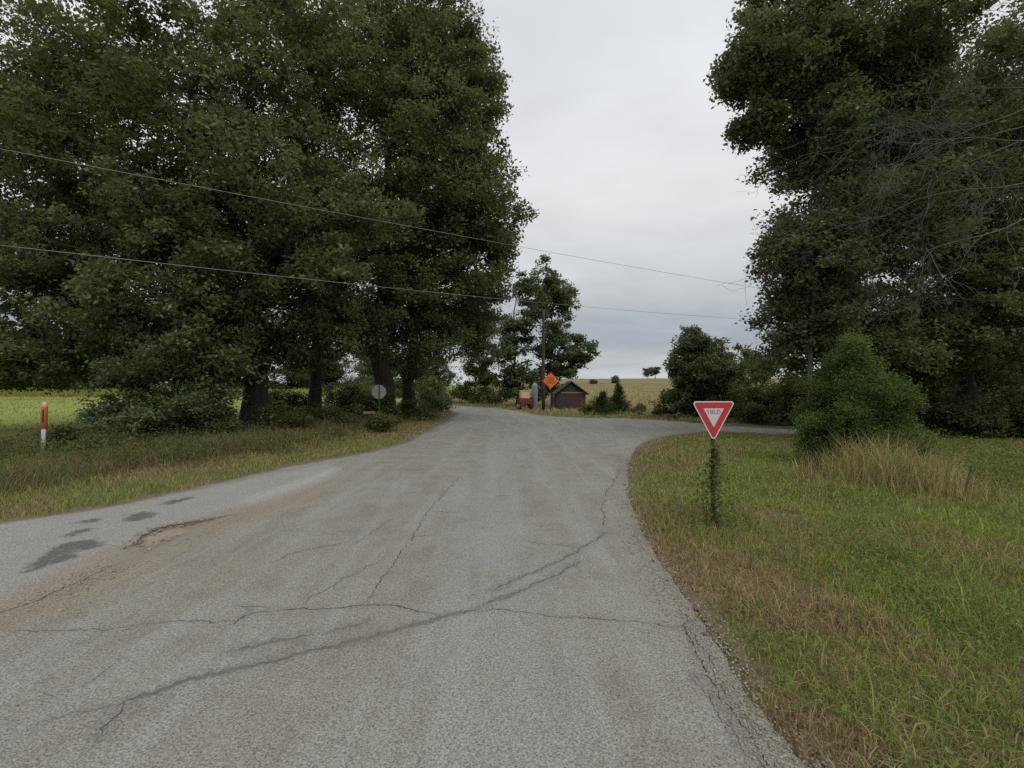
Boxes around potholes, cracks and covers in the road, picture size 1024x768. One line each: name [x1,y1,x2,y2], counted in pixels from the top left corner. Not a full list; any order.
pothole [117,515,230,566]
crack [14,469,674,739]
crack [673,614,776,766]
